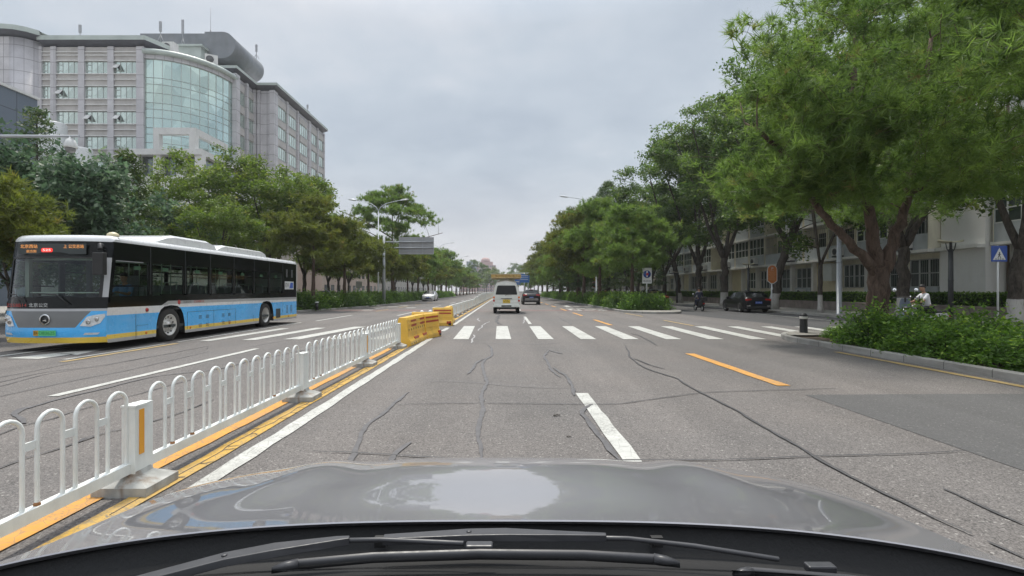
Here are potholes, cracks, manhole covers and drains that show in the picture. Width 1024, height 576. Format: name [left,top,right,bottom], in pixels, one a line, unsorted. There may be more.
crack [312,333,1024,558]
